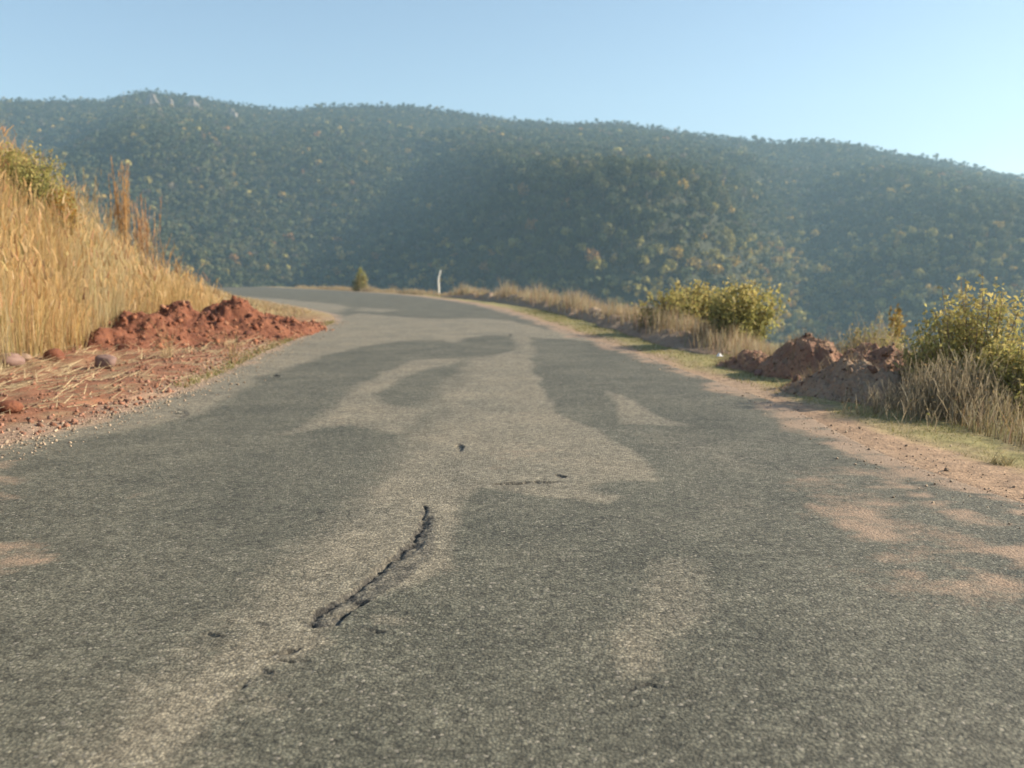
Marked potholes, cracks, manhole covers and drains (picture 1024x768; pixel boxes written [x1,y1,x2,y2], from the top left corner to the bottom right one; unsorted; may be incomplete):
crack [469,477,583,490]
